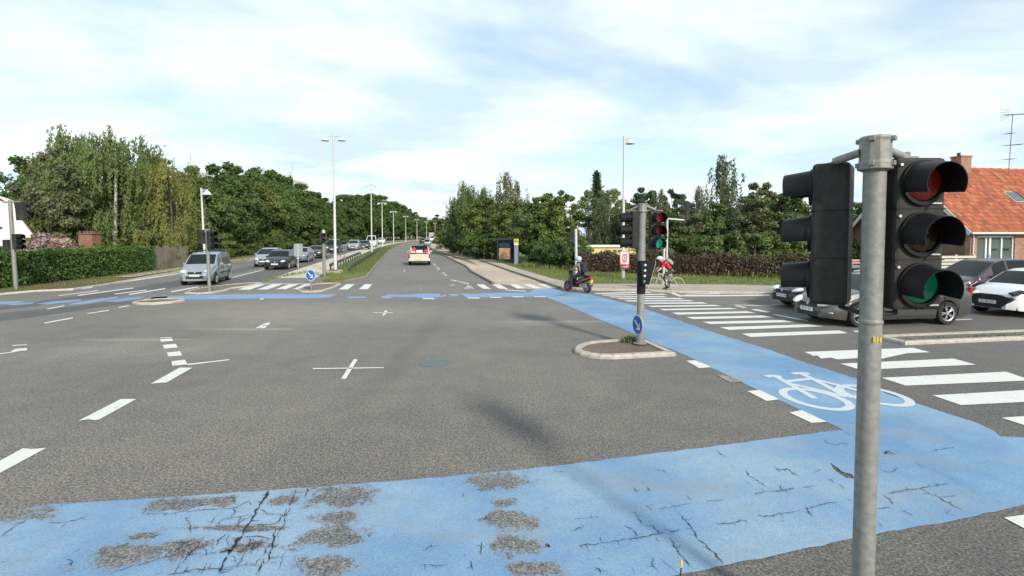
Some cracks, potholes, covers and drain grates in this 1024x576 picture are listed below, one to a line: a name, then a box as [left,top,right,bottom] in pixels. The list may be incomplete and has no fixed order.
crack [572,453,851,573]
crack [878,447,956,527]
manhole cover [418,358,452,367]
crack [111,489,309,575]
